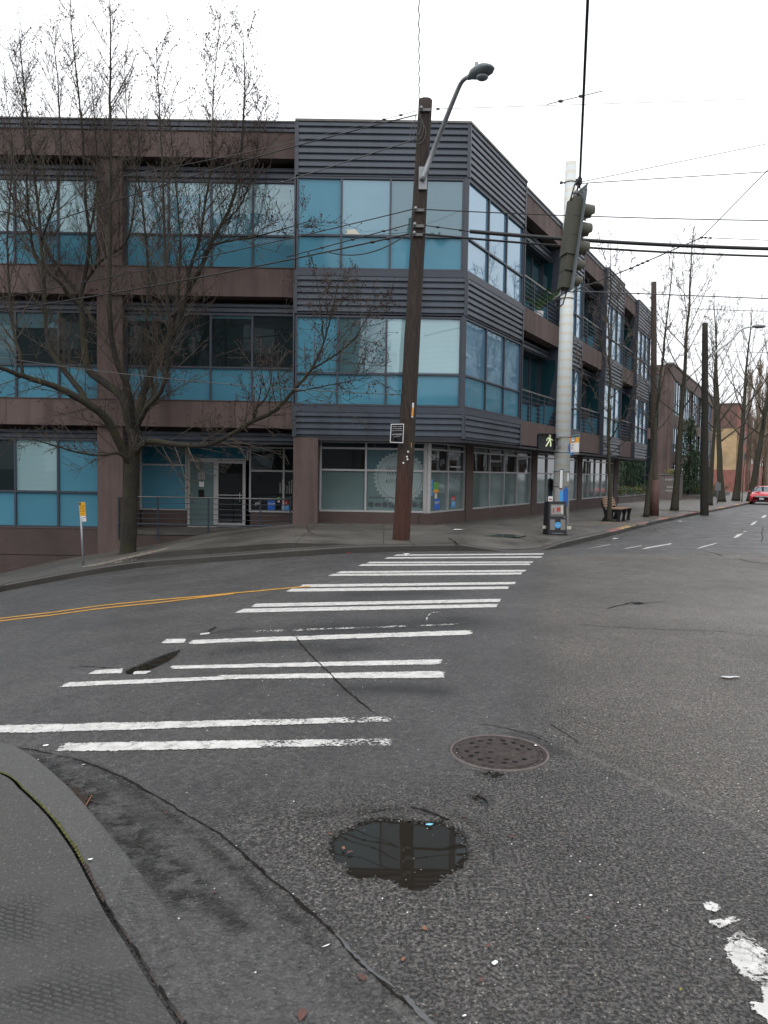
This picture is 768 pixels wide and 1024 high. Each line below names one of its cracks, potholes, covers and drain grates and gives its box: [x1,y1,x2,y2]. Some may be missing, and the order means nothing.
crack [293,634,380,717]
crack [584,602,749,635]
crack [480,723,578,743]
pothole [119,648,185,676]
pothole [311,812,486,901]
manhole cover [450,734,549,771]
